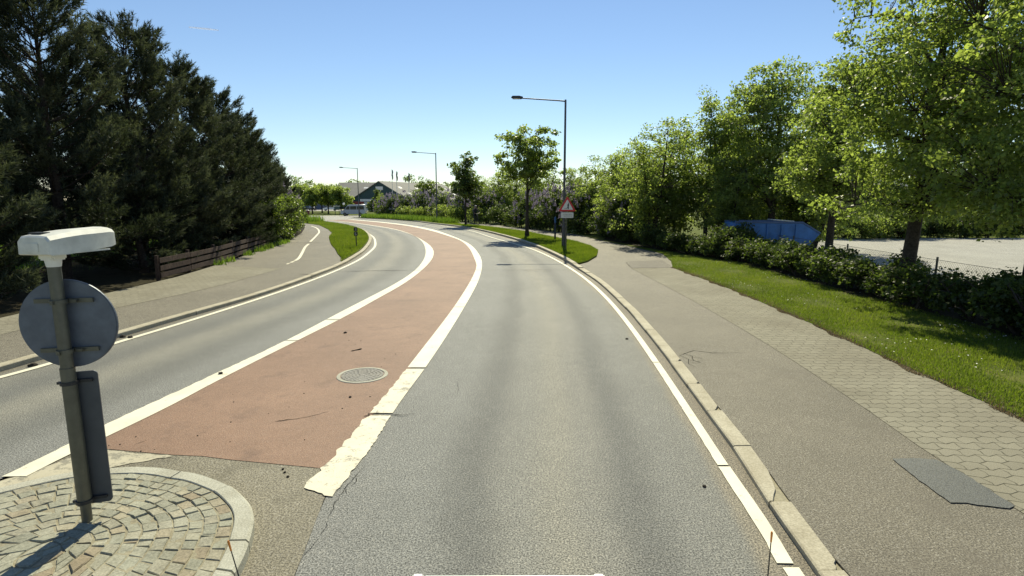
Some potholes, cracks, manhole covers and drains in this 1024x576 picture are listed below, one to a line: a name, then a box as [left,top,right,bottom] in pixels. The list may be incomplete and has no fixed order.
manhole cover [336,367,388,383]
